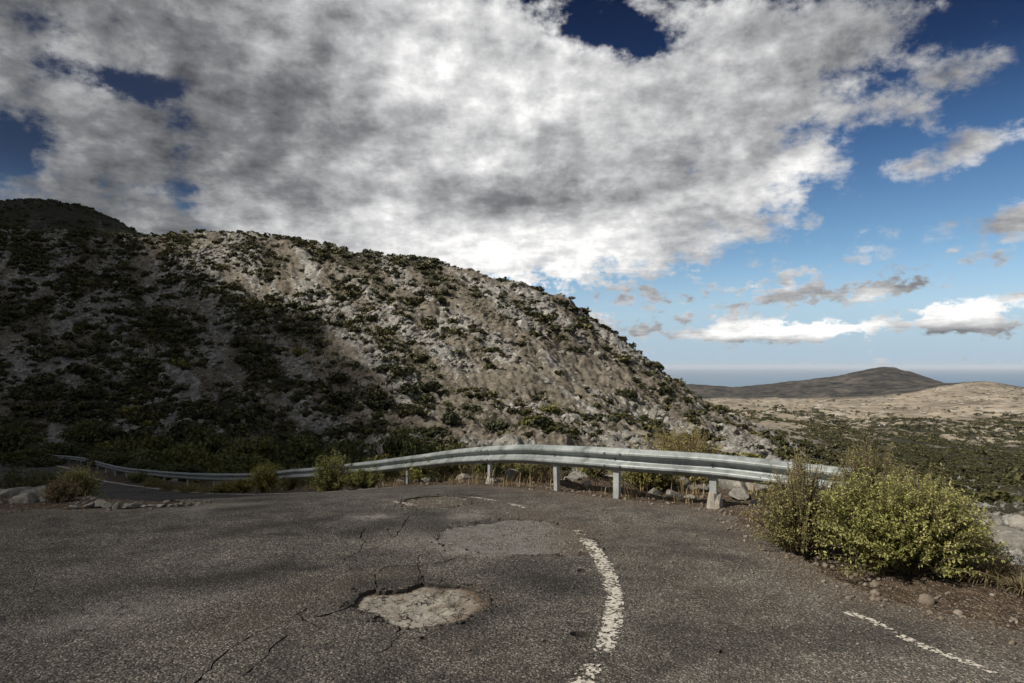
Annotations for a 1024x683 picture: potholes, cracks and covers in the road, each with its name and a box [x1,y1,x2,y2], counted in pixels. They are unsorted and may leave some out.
pothole [350,581,488,631]
crack [344,515,467,591]
